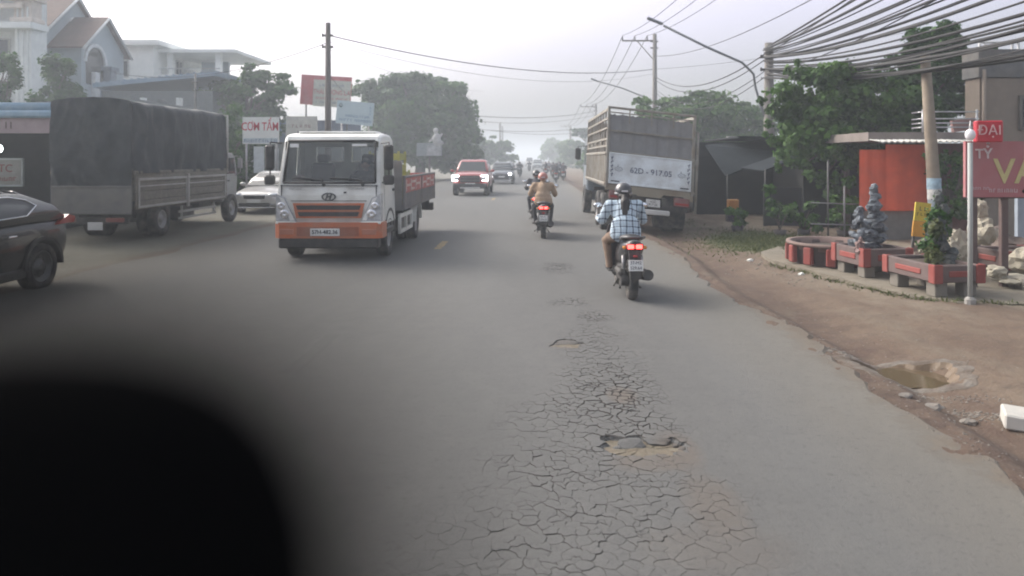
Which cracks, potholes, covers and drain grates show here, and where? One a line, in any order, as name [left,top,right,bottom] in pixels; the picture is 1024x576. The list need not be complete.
pothole [549,340,581,348]
pothole [600,436,690,457]
crack [427,297,876,576]
pothole [832,355,979,393]
